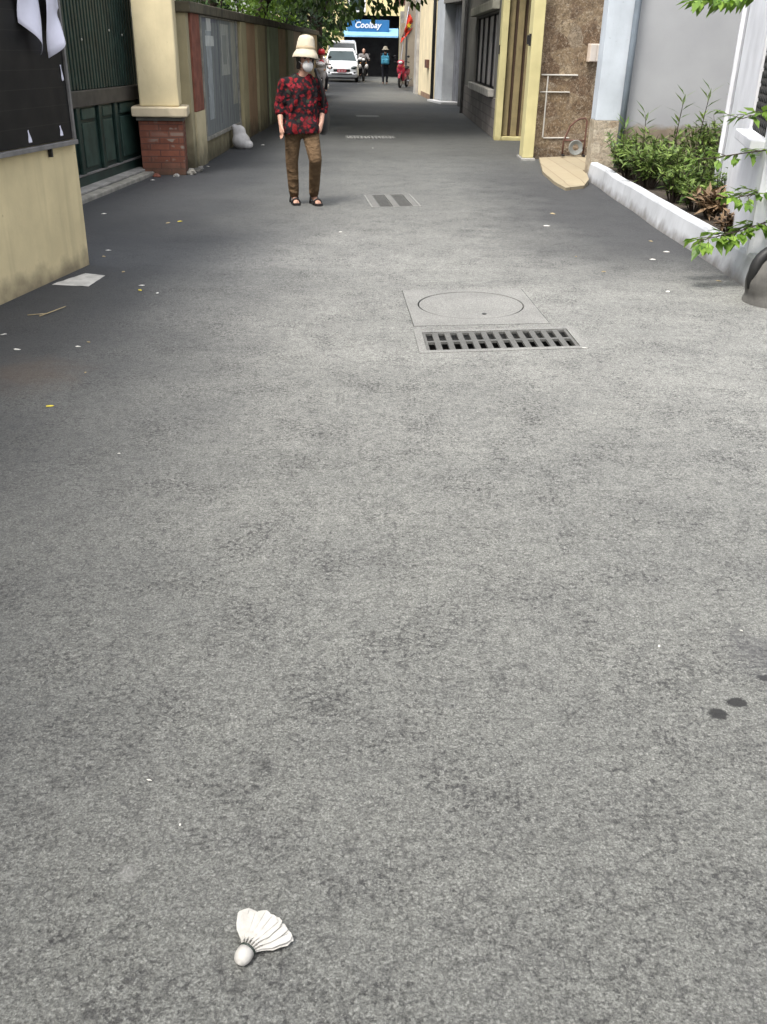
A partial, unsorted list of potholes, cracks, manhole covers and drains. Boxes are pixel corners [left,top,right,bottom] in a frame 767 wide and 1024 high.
manhole cover [402,289,549,326]
drain grate [414,326,589,354]
drain grate [364,194,421,208]
